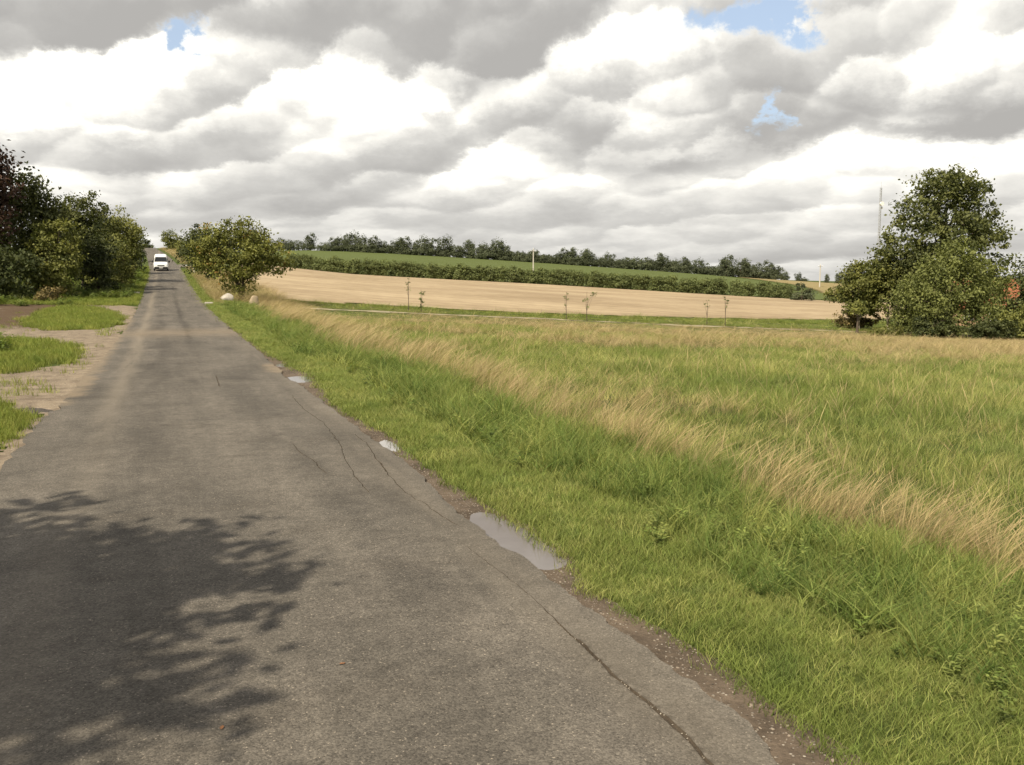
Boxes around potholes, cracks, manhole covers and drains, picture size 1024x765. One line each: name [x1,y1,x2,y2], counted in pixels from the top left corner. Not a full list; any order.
crack [466,546,714,765]
crack [292,397,457,525]
